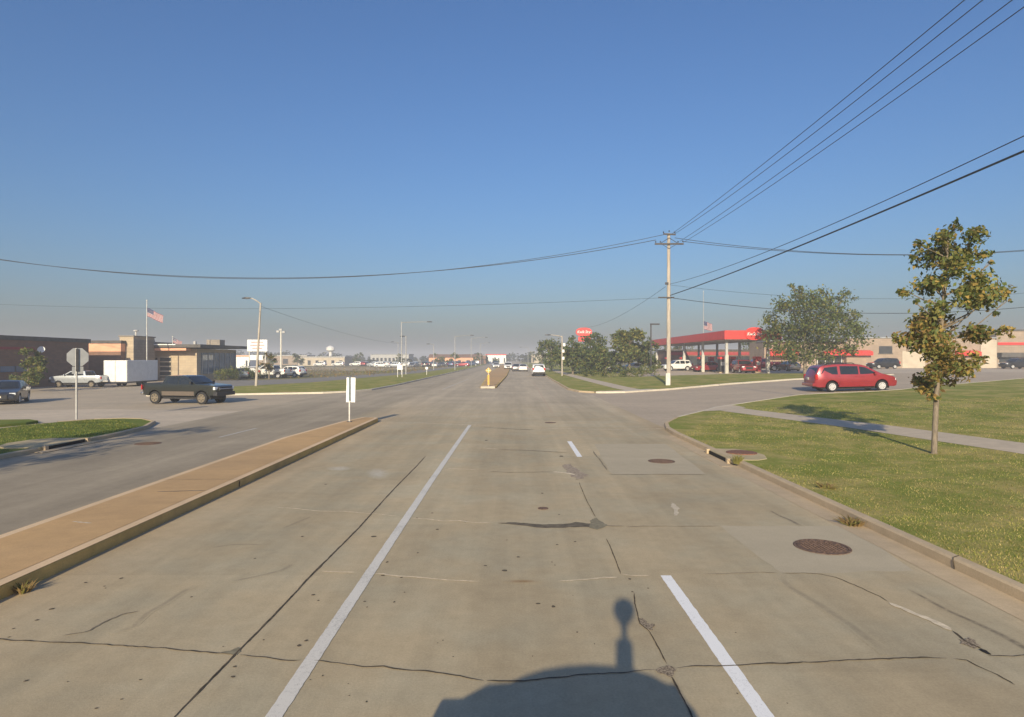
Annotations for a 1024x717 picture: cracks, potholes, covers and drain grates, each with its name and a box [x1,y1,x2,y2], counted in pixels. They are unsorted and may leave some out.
crack [812,573,1021,685]
manhole cover [793,539,852,555]
crack [0,611,229,654]
drain grate [0,437,105,453]
crack [679,657,934,668]
crack [318,660,641,682]
